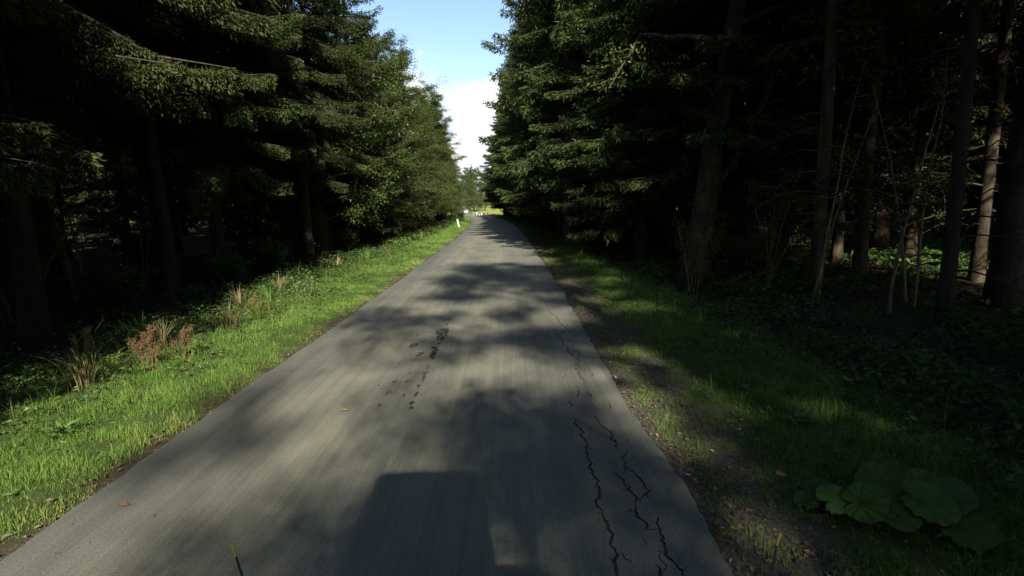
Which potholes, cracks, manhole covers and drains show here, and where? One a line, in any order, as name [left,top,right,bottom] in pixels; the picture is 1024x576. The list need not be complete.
crack [549,311,685,576]
